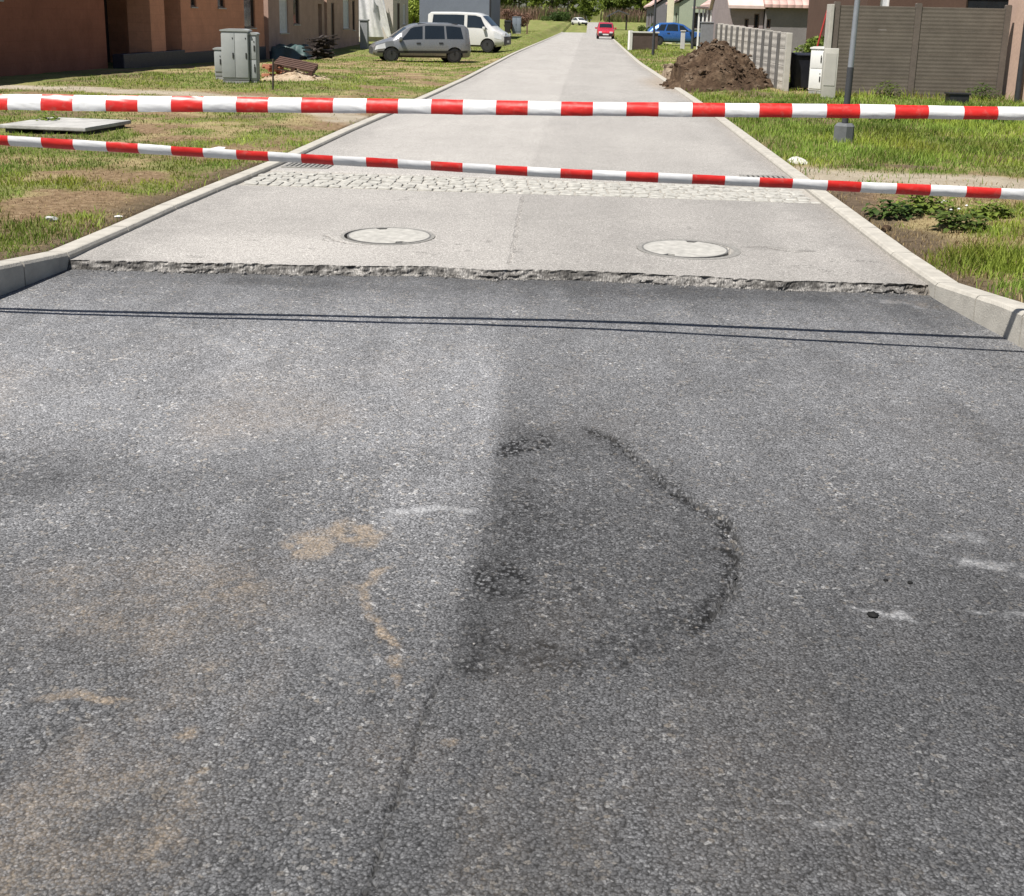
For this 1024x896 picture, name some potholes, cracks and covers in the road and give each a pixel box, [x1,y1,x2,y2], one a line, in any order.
manhole cover [340,227,435,245]
manhole cover [637,239,741,260]
crack [359,674,444,896]
